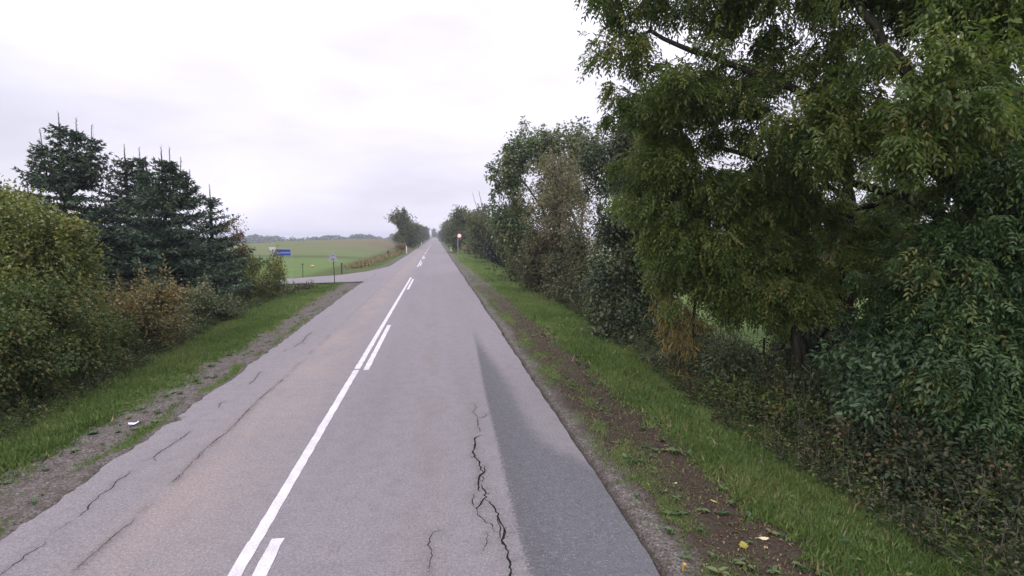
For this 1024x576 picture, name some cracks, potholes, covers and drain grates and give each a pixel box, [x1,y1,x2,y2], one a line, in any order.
crack [472,412,512,576]
crack [0,472,130,575]
